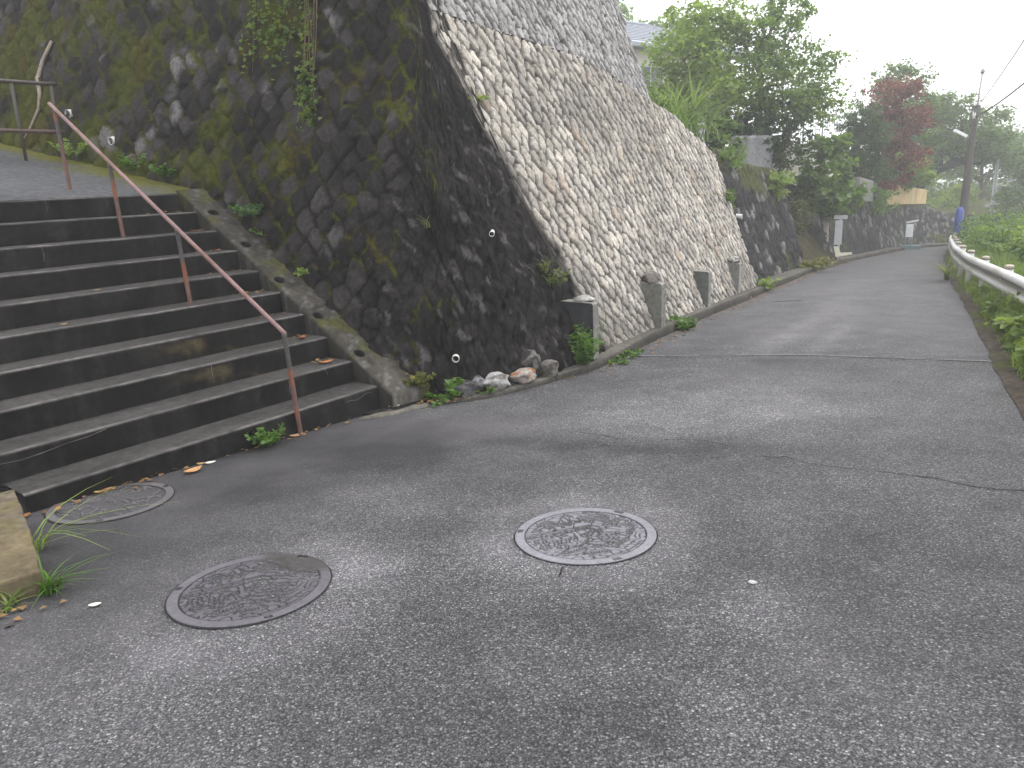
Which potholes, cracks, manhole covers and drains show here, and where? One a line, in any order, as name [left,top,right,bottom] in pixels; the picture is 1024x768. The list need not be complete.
manhole cover [513,508,658,566]
manhole cover [44,482,175,525]
crack [581,432,1024,491]
manhole cover [164,554,333,629]
